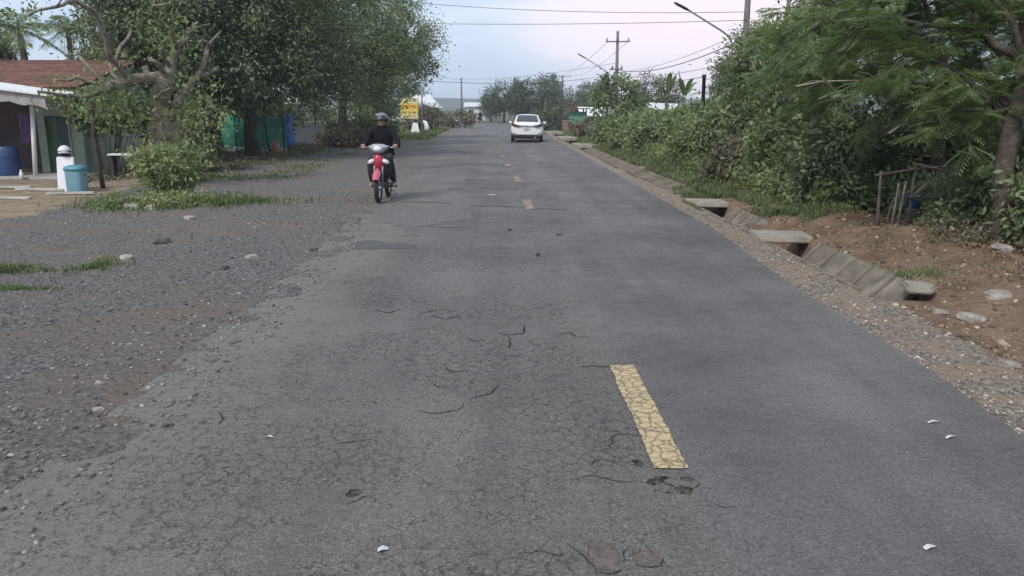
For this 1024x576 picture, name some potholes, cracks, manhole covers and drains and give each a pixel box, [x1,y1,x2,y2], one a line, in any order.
pothole [345,489,364,497]
crack [415,369,500,413]
crack [470,325,525,348]
pothole [646,476,670,486]
pothole [674,486,693,495]
crack [572,433,643,482]
